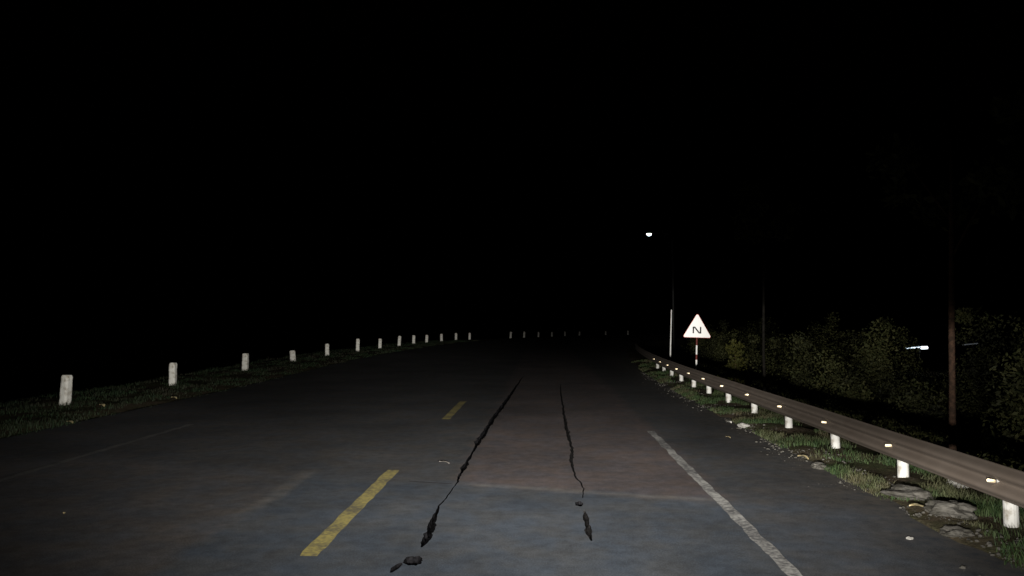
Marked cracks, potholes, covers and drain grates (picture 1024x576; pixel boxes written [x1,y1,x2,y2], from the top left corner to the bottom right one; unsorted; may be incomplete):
crack [560,384,592,541]
crack [412,376,524,547]
